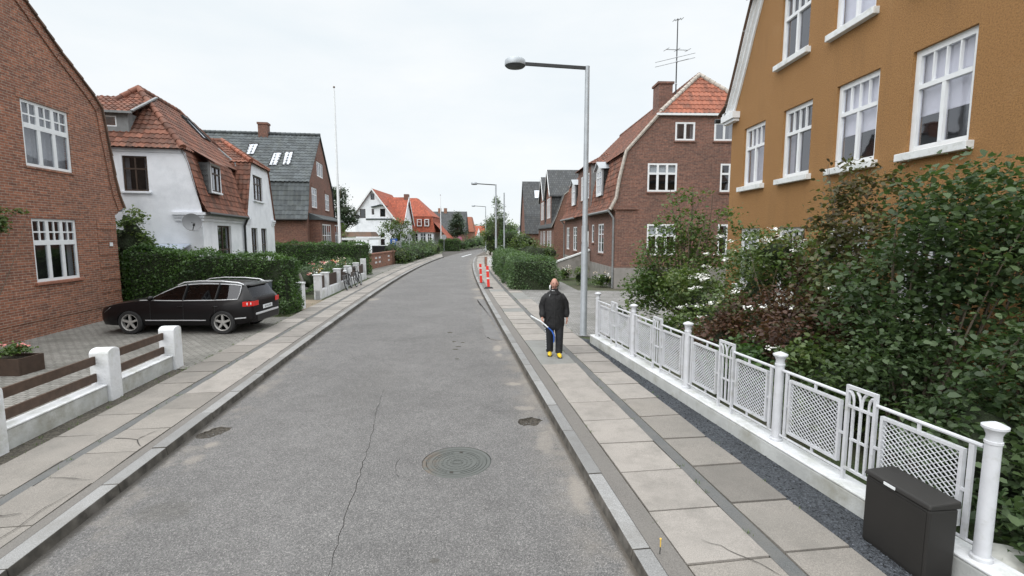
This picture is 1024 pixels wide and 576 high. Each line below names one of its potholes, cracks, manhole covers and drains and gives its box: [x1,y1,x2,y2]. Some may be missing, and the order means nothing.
pothole [195,427,232,439]
crack [328,390,384,576]
manhole cover [422,447,491,478]
pothole [518,417,543,426]
